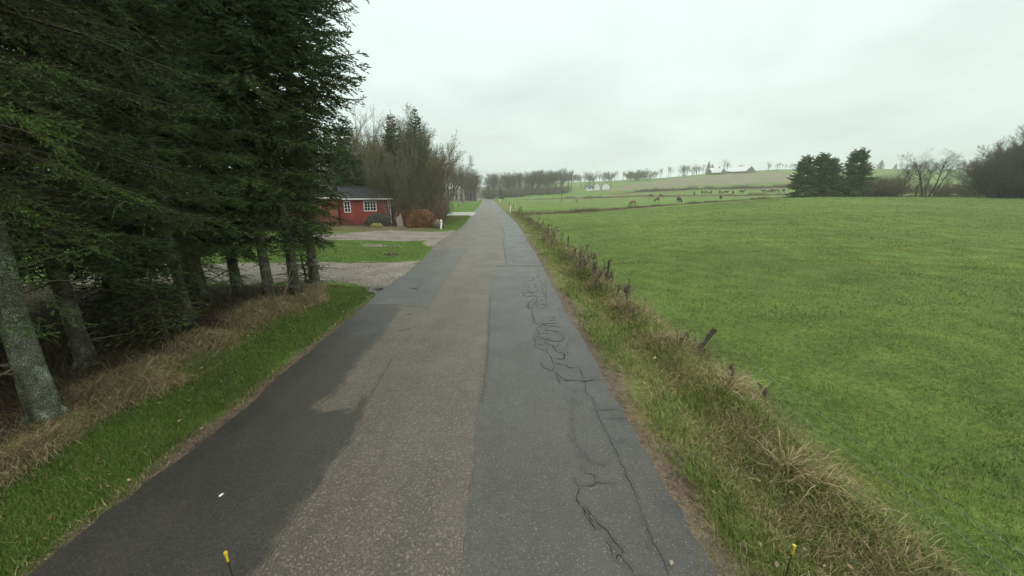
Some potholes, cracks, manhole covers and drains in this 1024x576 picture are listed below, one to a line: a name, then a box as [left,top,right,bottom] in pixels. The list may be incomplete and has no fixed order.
crack [522,276,668,573]
